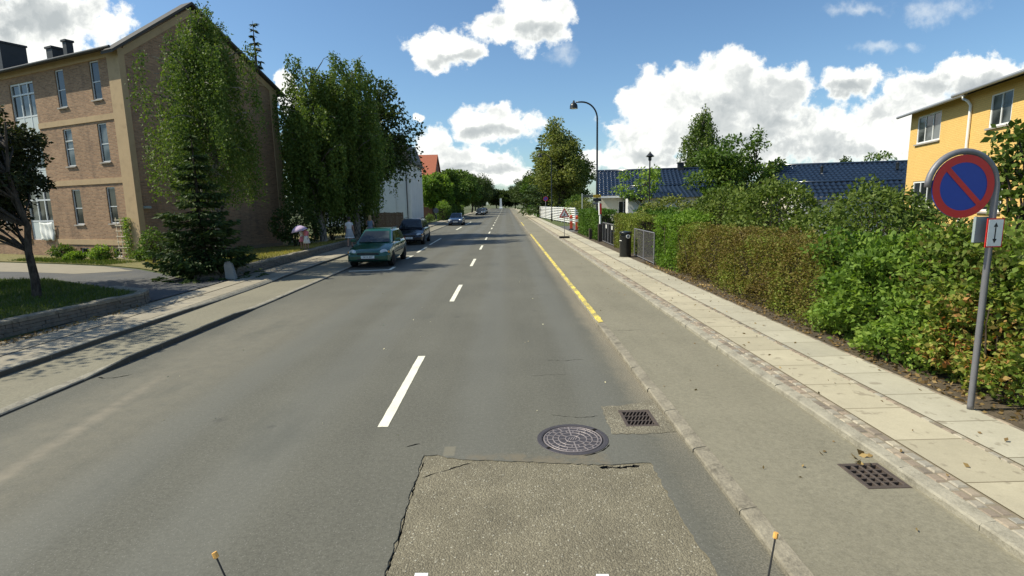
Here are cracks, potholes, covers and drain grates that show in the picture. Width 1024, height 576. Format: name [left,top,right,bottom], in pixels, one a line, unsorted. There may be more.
drain grate [618,410,659,427]
crack [385,444,470,576]
manhole cover [537,424,609,455]
drain grate [837,463,912,489]
